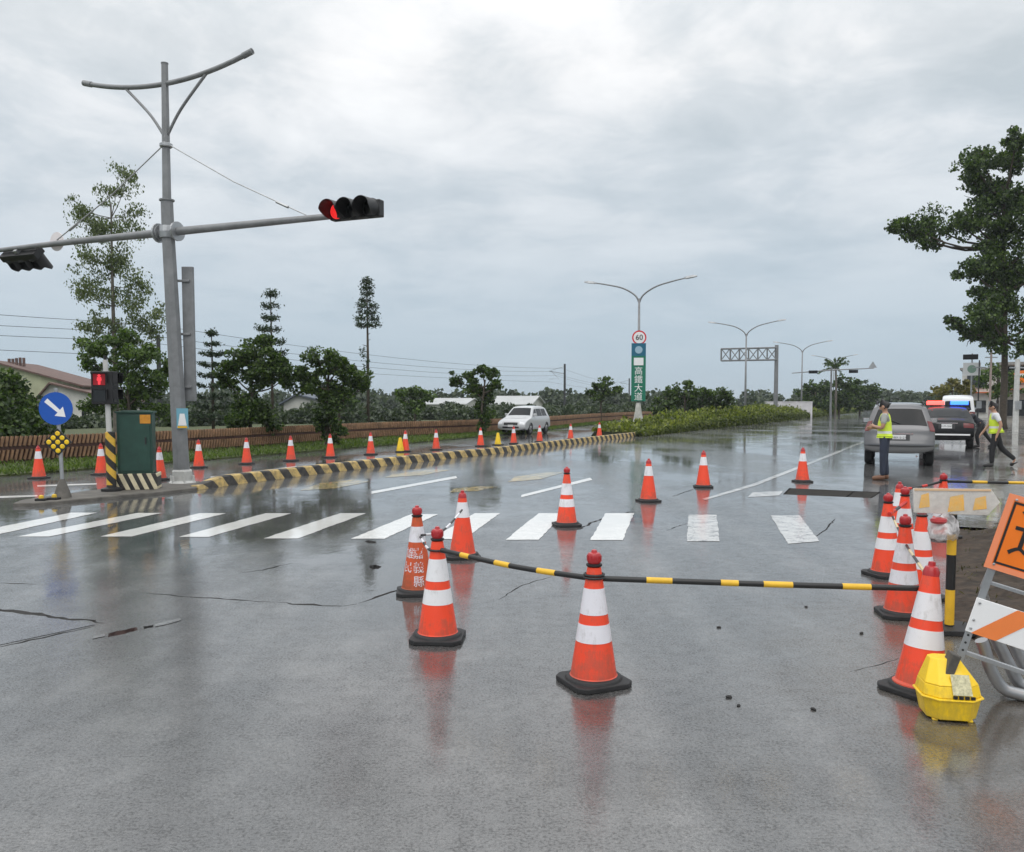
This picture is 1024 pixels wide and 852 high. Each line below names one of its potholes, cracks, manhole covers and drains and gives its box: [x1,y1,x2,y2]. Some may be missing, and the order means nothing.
crack [149,590,396,606]
